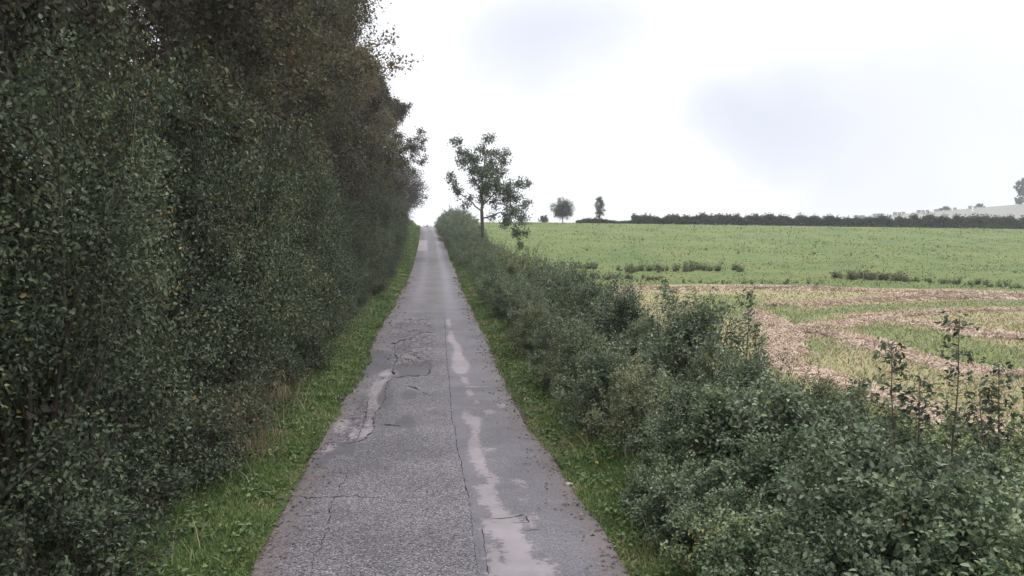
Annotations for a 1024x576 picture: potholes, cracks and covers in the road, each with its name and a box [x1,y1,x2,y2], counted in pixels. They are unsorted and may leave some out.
crack [325,318,434,444]
crack [482,507,535,574]
crack [300,464,389,570]
